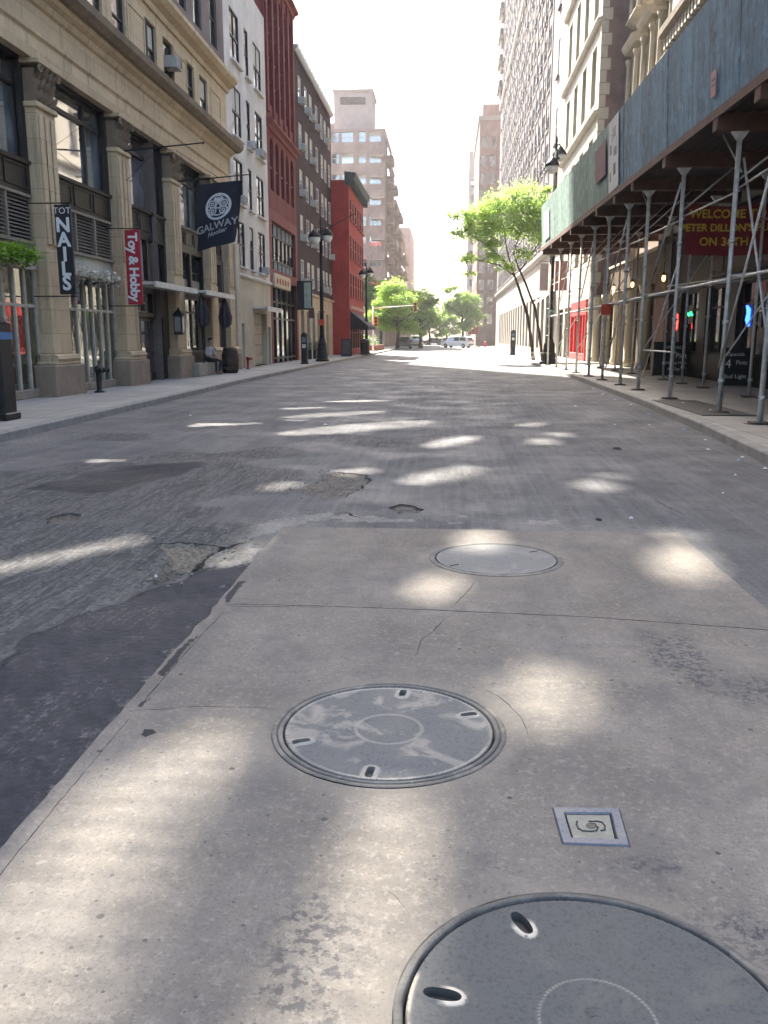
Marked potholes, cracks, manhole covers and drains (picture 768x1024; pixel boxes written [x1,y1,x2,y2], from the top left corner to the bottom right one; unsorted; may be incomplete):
pothole [46,513,82,524]
manhole cover [393,892,768,1024]
pothole [389,504,425,514]
utility cover [552,807,630,847]
pothole [131,536,259,588]
pothole [275,470,372,499]
manhole cover [429,543,564,577]
manhole cover [272,683,506,789]
